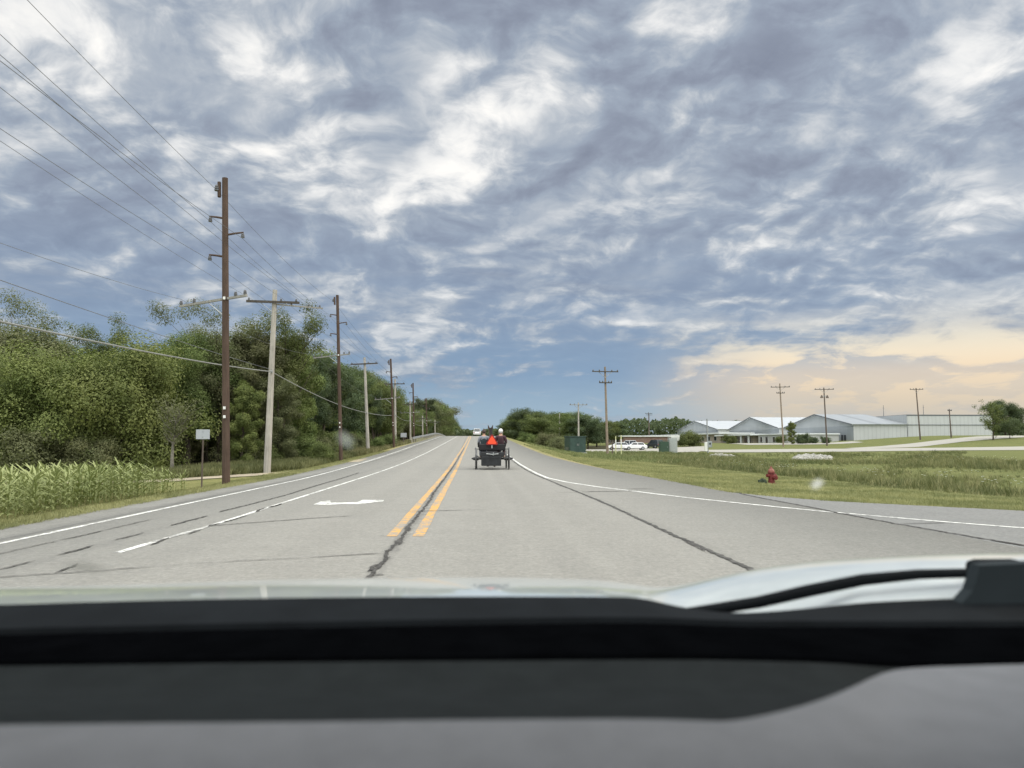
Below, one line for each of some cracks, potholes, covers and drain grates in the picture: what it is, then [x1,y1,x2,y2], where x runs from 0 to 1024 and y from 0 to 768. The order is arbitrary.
crack [0,449,481,578]
